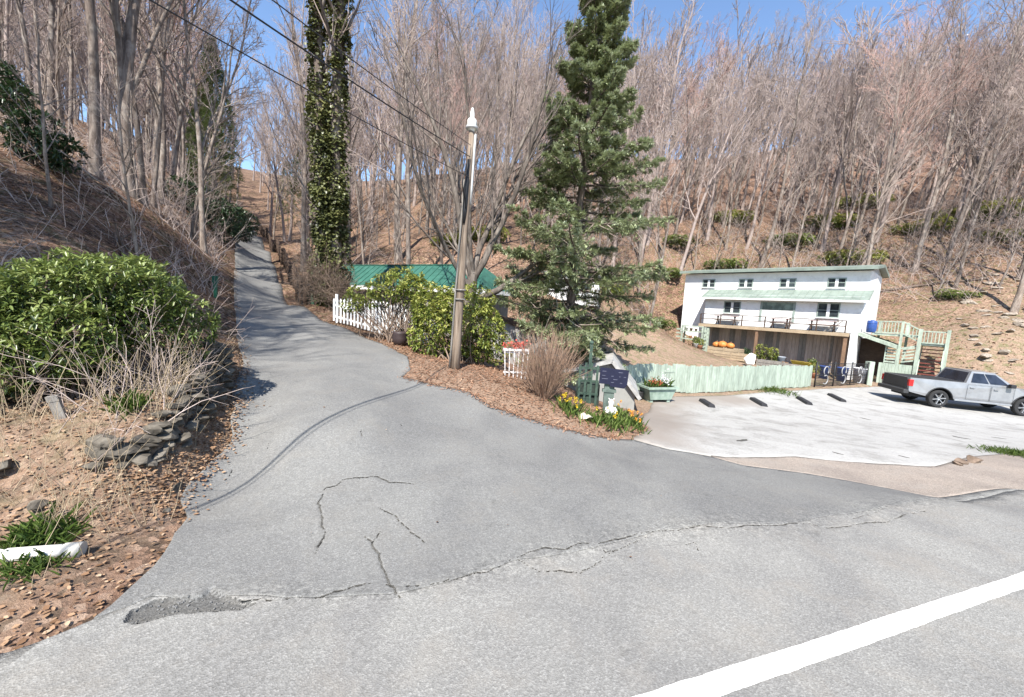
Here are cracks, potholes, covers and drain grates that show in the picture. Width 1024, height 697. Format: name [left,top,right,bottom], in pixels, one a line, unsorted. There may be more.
crack [316,476,413,551]
crack [241,509,925,602]
pothole [124,589,256,624]
